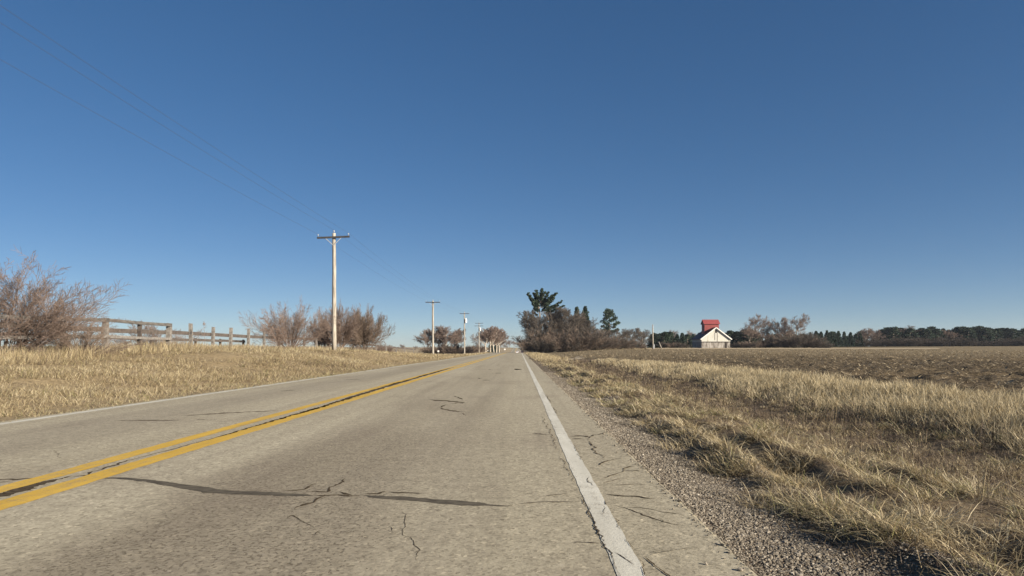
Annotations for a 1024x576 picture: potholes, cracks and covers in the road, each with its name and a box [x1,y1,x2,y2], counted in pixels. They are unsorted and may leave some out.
crack [429,396,465,415]
crack [283,478,413,509]
crack [520,396,688,576]
